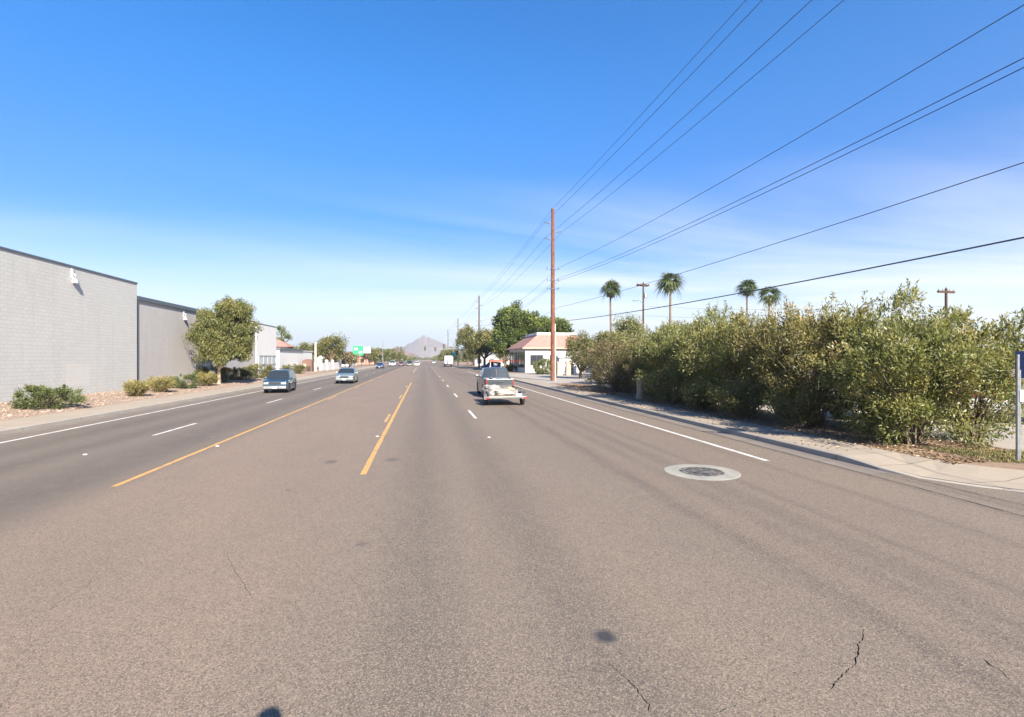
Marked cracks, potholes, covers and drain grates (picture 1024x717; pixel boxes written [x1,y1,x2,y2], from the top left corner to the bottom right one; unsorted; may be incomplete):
crack [609,663,650,711]
manhole cover [664,464,741,480]
crack [830,629,864,690]
